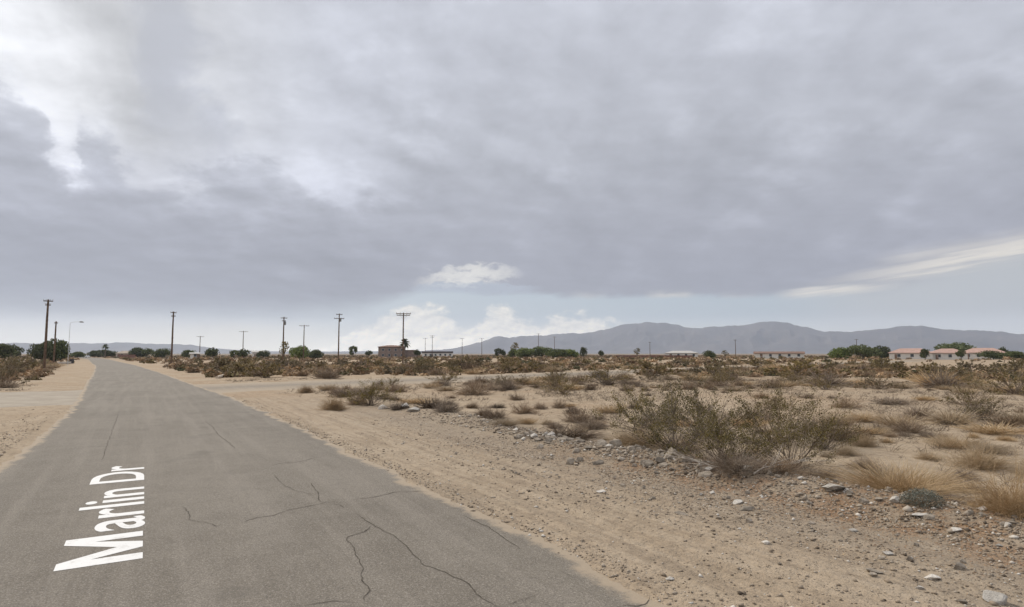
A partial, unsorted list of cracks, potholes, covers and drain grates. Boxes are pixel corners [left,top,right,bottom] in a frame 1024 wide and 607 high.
crack [180,459,344,526]
crack [300,516,535,606]
